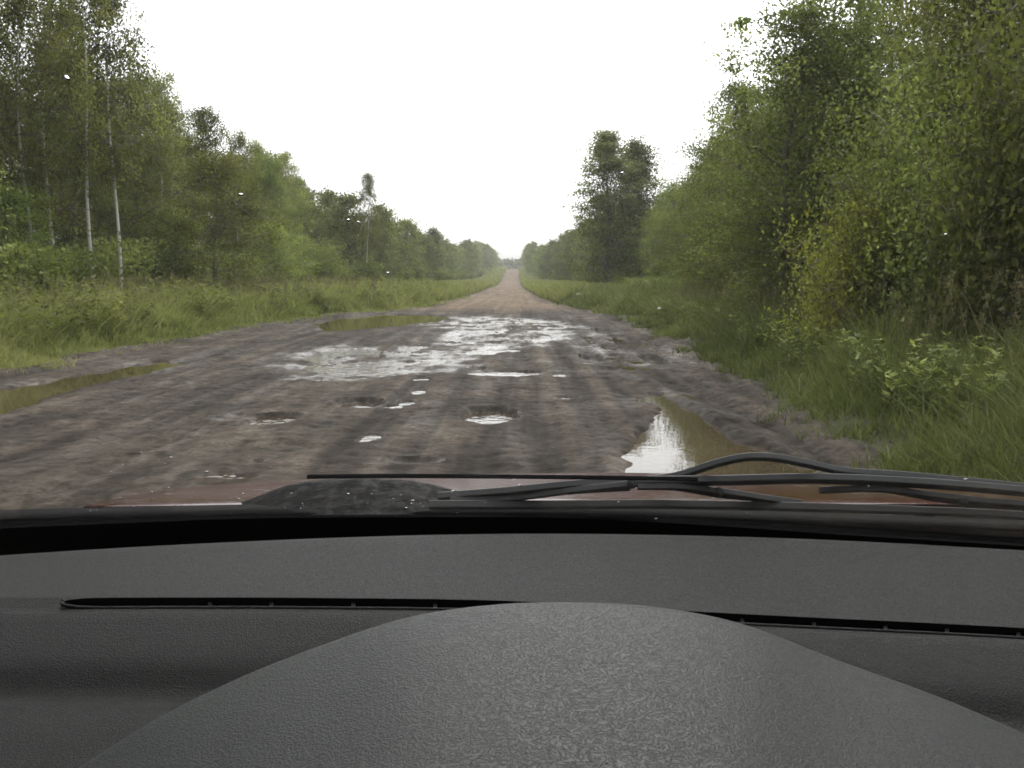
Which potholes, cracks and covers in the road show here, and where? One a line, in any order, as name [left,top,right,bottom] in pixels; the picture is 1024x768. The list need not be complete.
pothole [326,397,385,408]
pothole [354,432,386,442]
pothole [209,411,305,425]
pothole [457,404,521,425]
